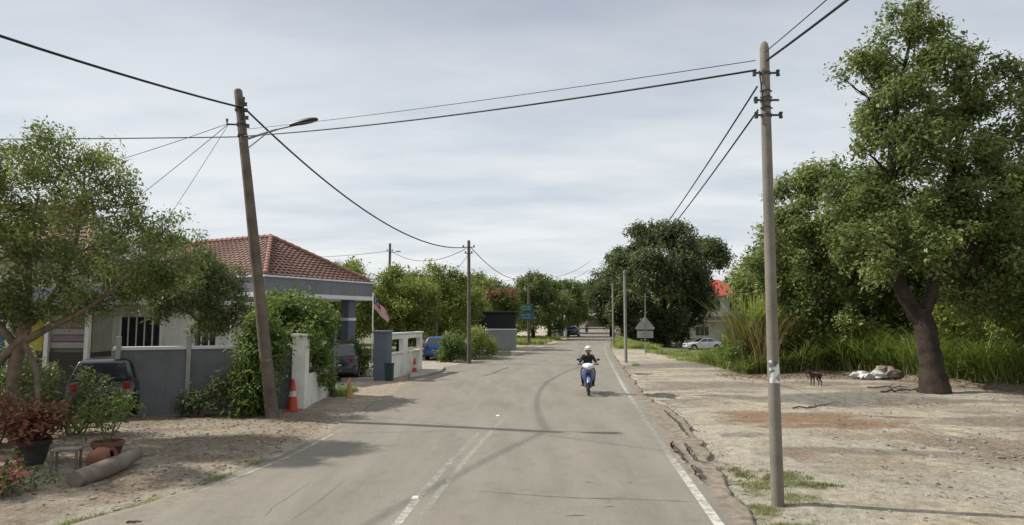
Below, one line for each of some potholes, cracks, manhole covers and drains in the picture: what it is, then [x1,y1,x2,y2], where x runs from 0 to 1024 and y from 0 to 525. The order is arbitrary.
crack [660,410,713,465]
